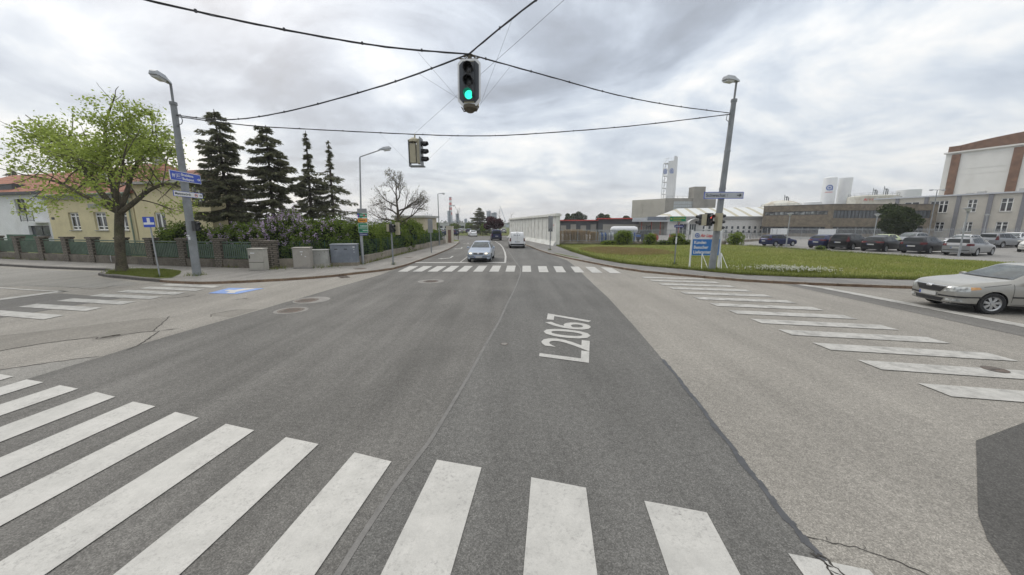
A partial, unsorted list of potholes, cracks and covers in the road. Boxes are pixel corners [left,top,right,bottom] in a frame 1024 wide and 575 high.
crack [807,536,928,575]
crack [1,316,177,351]
